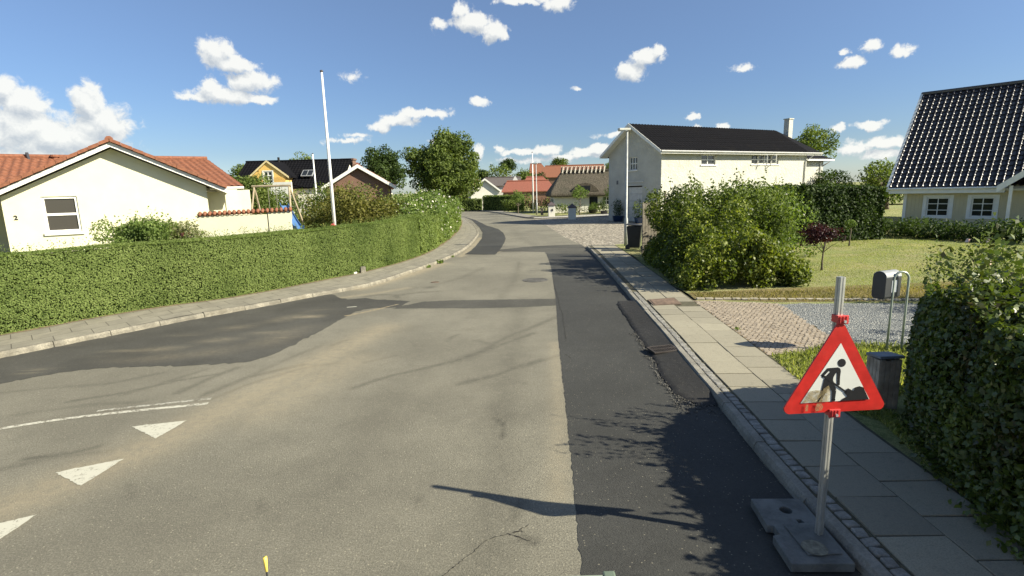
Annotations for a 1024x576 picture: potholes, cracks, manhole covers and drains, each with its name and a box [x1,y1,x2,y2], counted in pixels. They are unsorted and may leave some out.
drain grate [646,344,678,354]
manhole cover [648,298,682,306]
crack [442,524,533,576]
